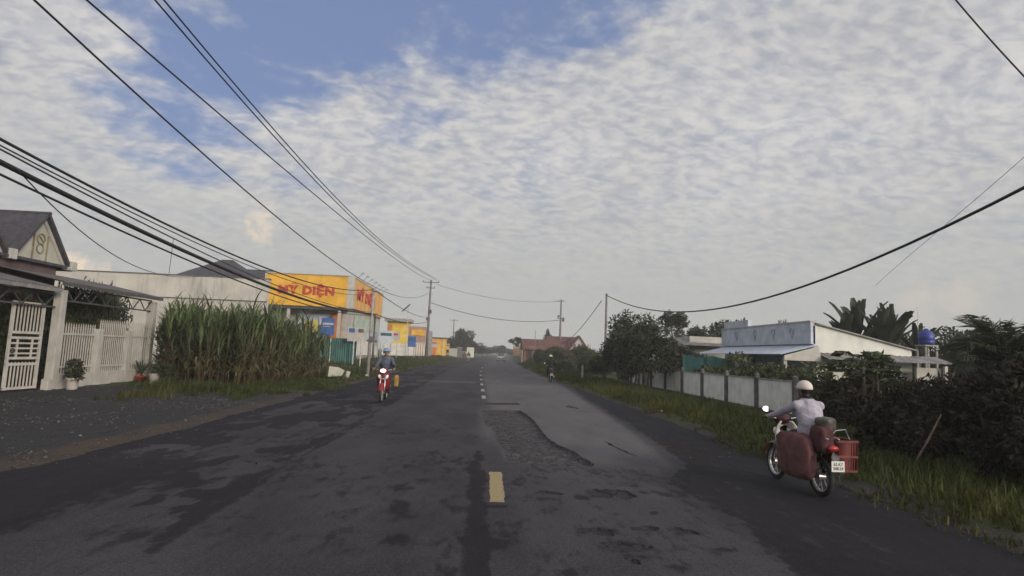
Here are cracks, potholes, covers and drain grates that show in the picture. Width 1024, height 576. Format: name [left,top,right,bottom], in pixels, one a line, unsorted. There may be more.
pothole [481,410,594,467]
pothole [615,490,636,500]
pothole [585,489,614,498]
pothole [600,542,654,552]
pothole [667,526,700,535]
